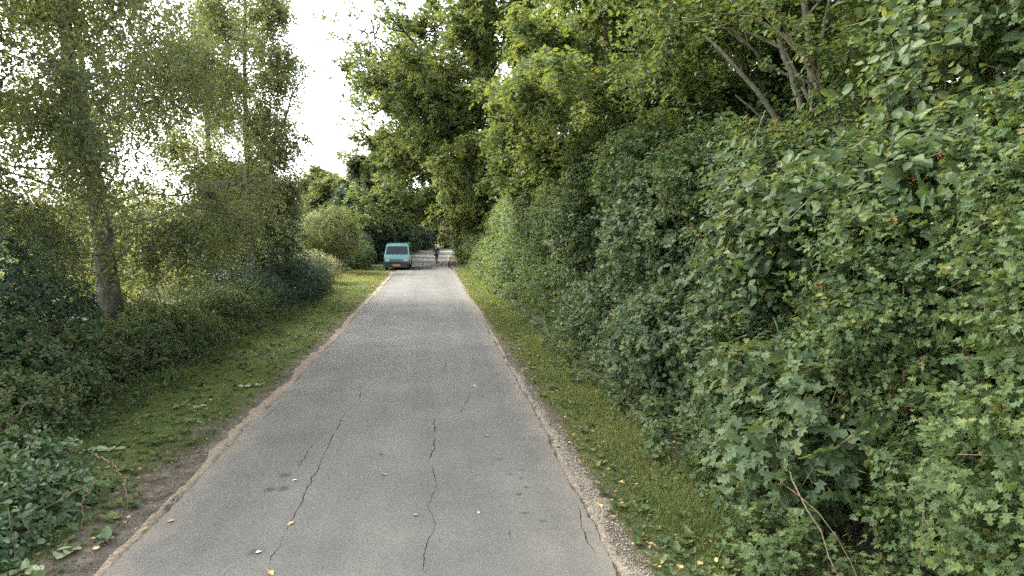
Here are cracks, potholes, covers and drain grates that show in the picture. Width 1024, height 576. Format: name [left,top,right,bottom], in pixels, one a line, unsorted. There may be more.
crack [423,419,437,568]
crack [270,385,361,560]
